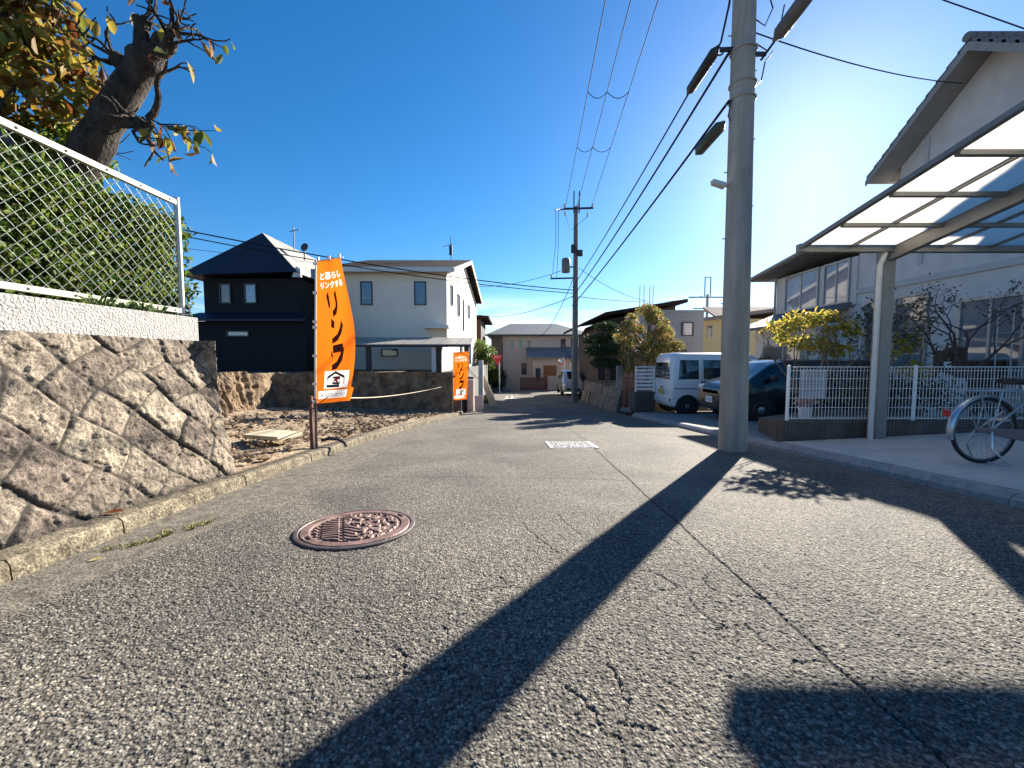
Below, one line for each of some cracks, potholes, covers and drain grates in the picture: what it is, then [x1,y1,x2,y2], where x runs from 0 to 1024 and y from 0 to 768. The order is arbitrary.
manhole cover [292,509,415,551]
crack [664,538,817,678]
crack [567,670,653,768]
